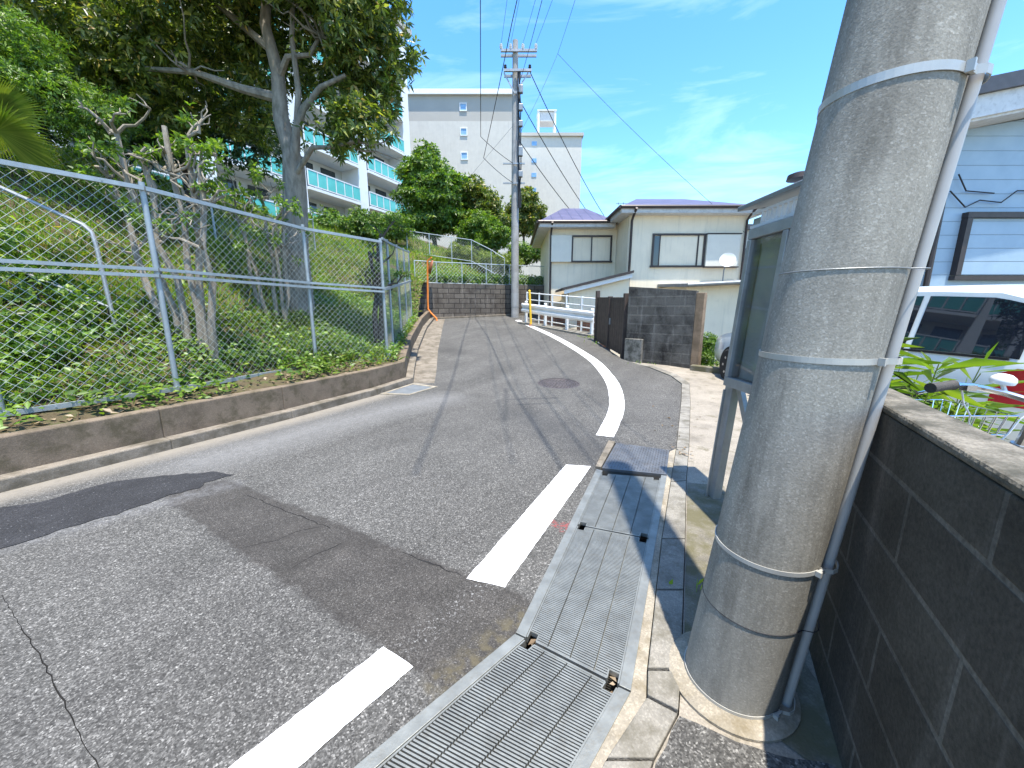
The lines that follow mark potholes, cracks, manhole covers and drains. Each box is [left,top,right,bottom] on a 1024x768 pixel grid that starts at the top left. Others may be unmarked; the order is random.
drain grate [377,640,617,768]
manhole cover [538,378,580,389]
crack [2,595,100,768]
drain grate [526,526,648,688]
drain grate [578,474,660,539]
